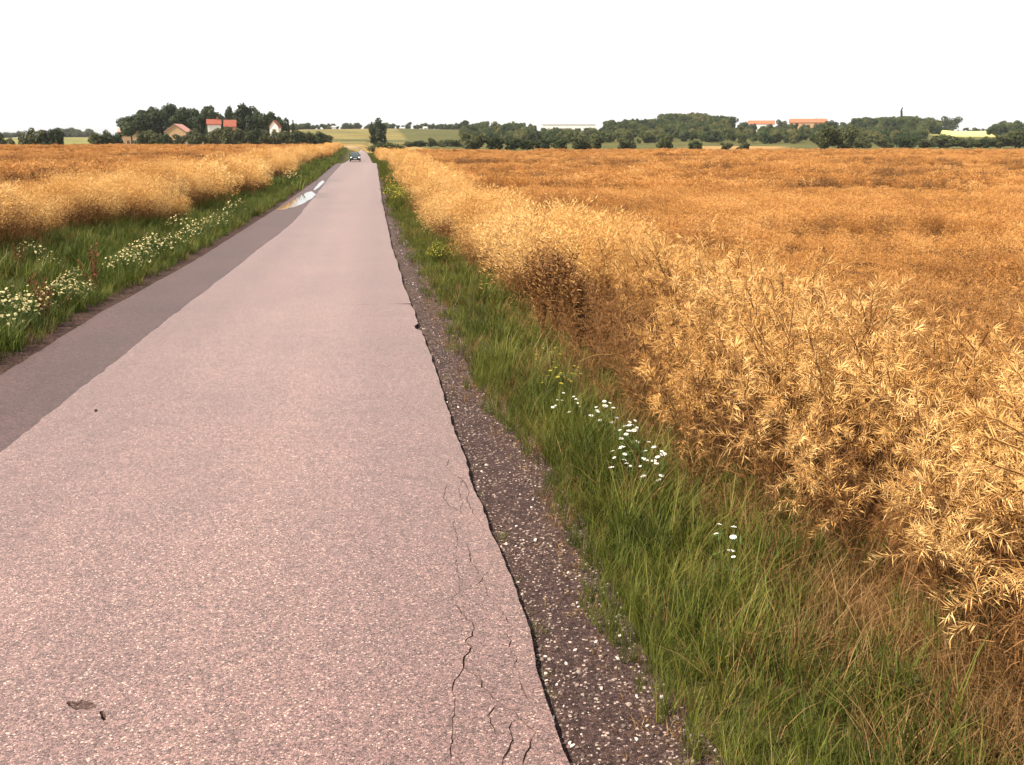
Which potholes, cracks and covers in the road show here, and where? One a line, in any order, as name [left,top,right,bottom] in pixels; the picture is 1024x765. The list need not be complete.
crack [443,460,553,765]
pothole [67,700,96,710]
